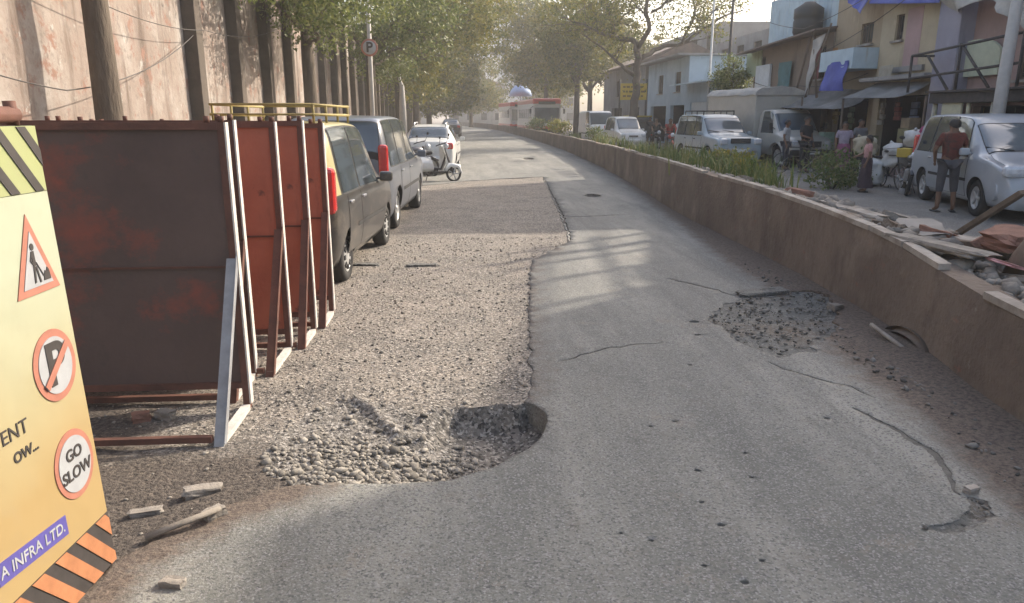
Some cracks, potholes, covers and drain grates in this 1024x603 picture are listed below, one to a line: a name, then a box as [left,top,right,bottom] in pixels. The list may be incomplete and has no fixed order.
pothole [708,292,839,358]
pothole [265,396,543,485]
crack [853,408,959,495]
